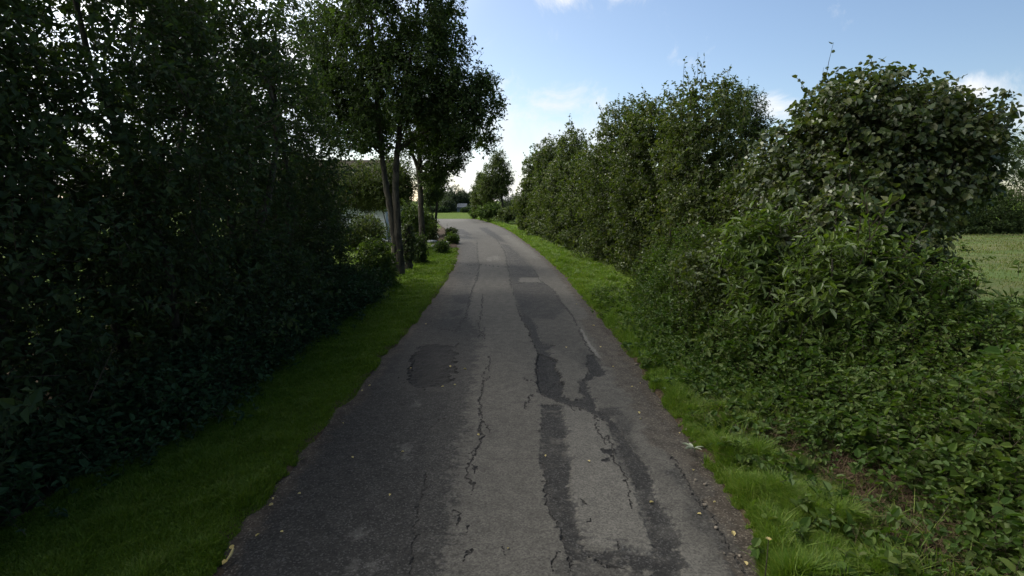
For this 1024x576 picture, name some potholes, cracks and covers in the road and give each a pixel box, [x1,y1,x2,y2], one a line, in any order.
crack [451,356,491,562]
crack [438,238,633,509]
